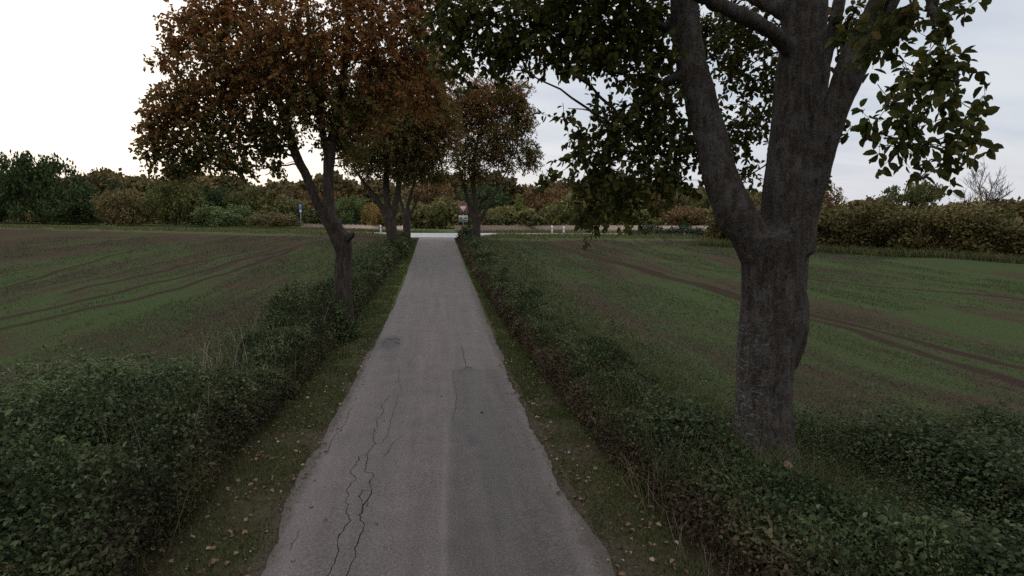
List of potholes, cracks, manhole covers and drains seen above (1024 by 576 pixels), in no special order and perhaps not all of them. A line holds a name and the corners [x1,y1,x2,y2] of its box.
crack [327,367,406,576]
